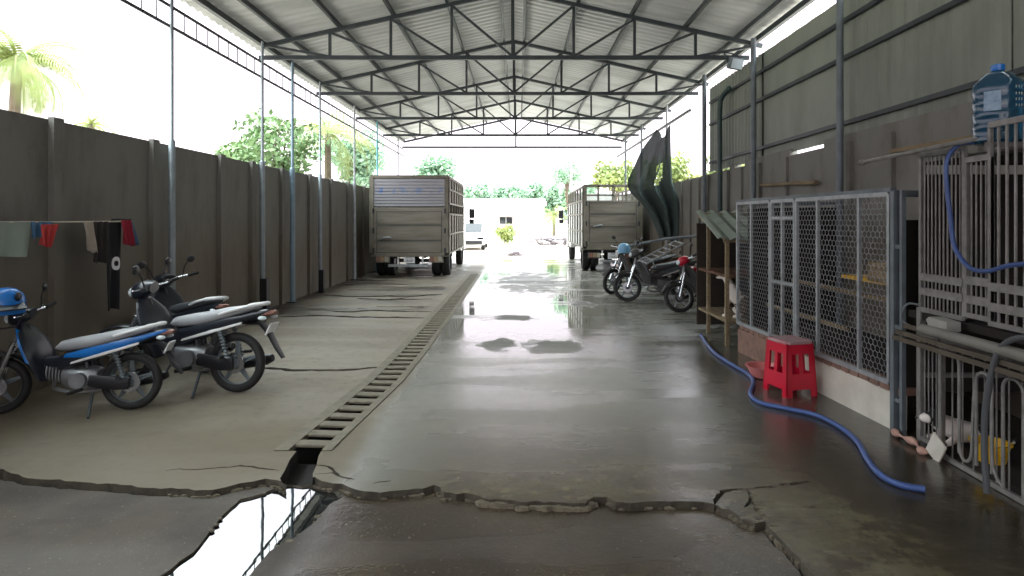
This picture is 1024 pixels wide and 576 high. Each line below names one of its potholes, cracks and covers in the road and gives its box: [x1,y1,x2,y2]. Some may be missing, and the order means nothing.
crack [309,465,814,576]
pothole [160,485,344,576]
crack [0,465,287,499]
